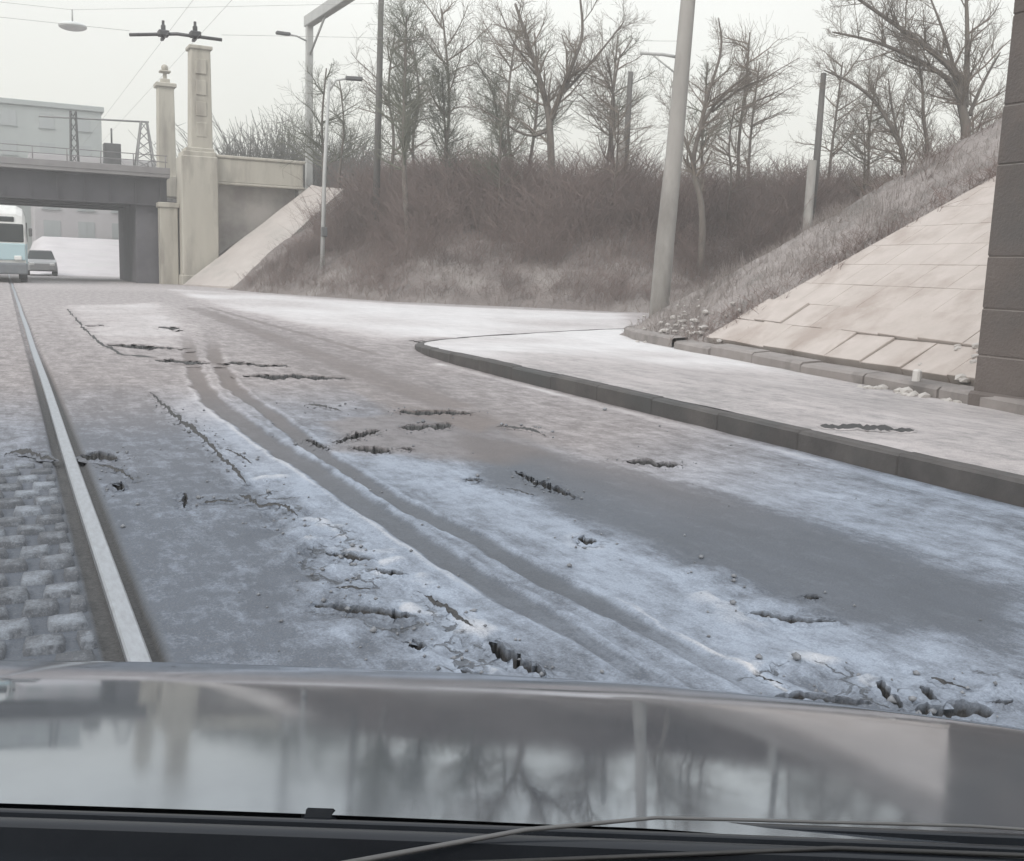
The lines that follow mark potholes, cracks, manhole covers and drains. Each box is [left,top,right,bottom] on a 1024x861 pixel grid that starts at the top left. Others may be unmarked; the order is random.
pothole [817,423,917,434]
pothole [908,698,1002,723]
pothole [870,680,911,712]
pothole [331,429,383,446]
crack [88,392,302,518]
pothole [912,684,954,710]
pothole [771,689,880,709]
crack [65,309,159,358]
pothole [511,471,579,500]
pothole [350,445,393,456]
pothole [398,422,455,432]
pothole [623,458,686,470]
